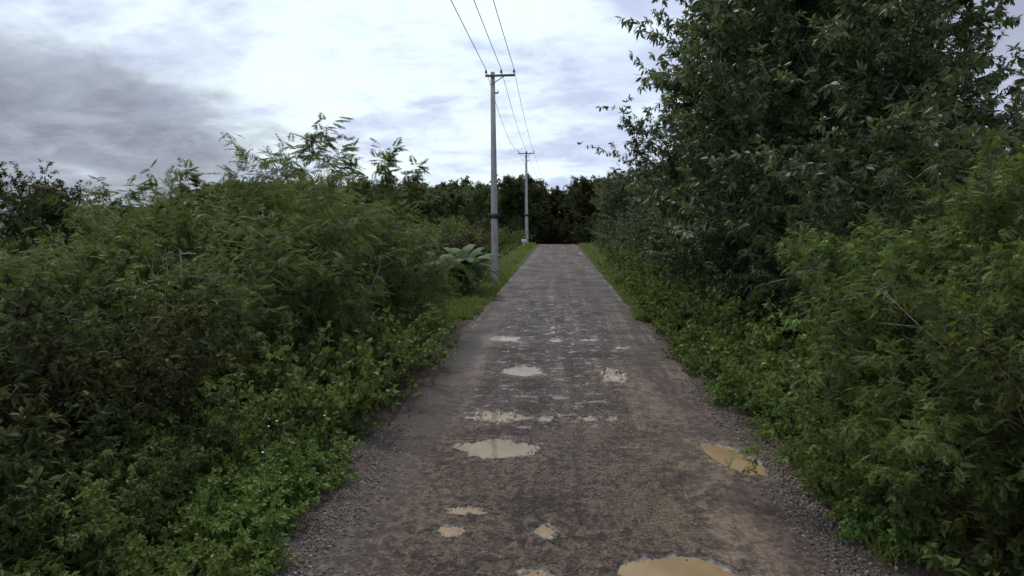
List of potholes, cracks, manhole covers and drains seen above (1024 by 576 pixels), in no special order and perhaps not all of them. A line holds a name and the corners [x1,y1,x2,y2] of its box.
pothole [450,437,545,460]
pothole [698,442,770,476]
pothole [452,409,535,426]
pothole [528,522,560,541]
pothole [597,367,631,384]
pothole [610,553,742,576]
pothole [439,504,492,515]
pothole [433,523,468,539]
pothole [512,566,565,576]
pothole [497,365,544,376]
